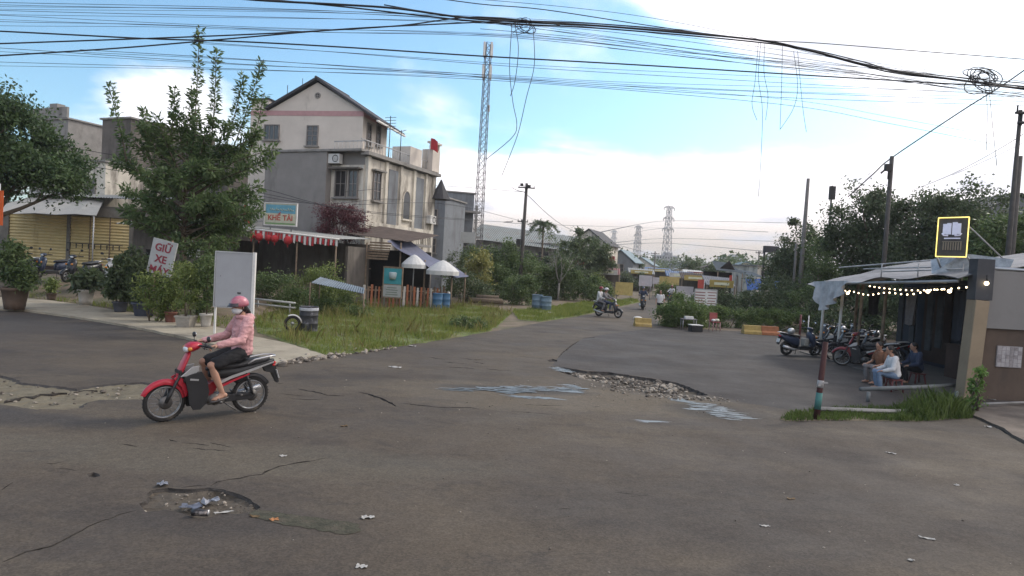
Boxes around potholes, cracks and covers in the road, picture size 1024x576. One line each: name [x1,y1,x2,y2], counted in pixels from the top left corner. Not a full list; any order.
pothole [551,366,707,396]
crack [170,440,229,451]
pothole [0,375,165,410]
crack [188,458,325,487]
pothole [140,488,261,519]
crack [4,510,136,562]
crack [276,382,477,410]
